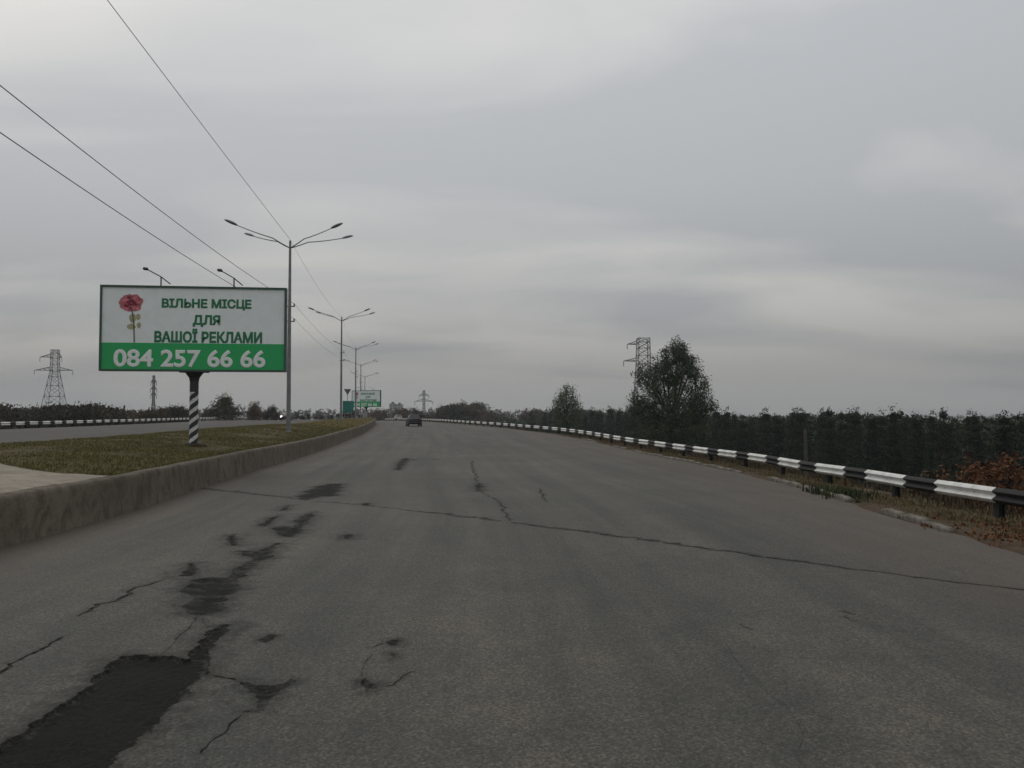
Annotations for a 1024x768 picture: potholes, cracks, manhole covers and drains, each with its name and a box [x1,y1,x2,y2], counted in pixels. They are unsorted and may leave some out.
crack [0,635,65,674]
crack [361,643,416,687]
crack [200,715,242,755]
pothole [180,543,280,616]
crack [78,576,176,616]
crack [201,461,1024,591]
pothole [272,513,315,537]
pothole [0,624,234,768]
pothole [296,484,343,500]
